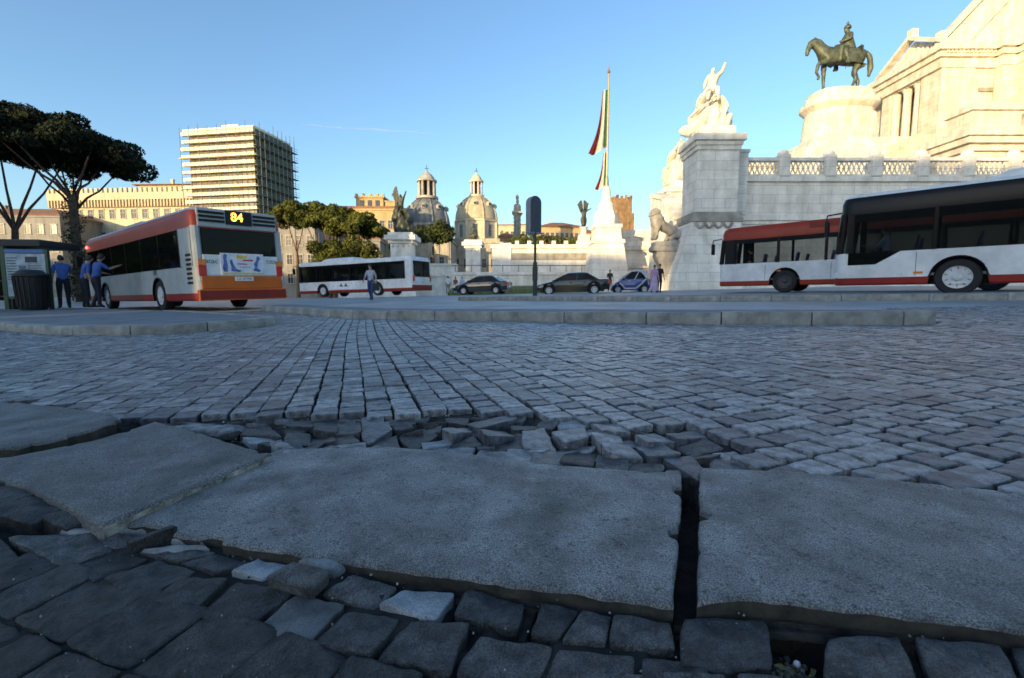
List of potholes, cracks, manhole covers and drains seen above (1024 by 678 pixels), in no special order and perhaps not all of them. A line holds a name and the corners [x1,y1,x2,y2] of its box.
pothole [178,414,726,472]
